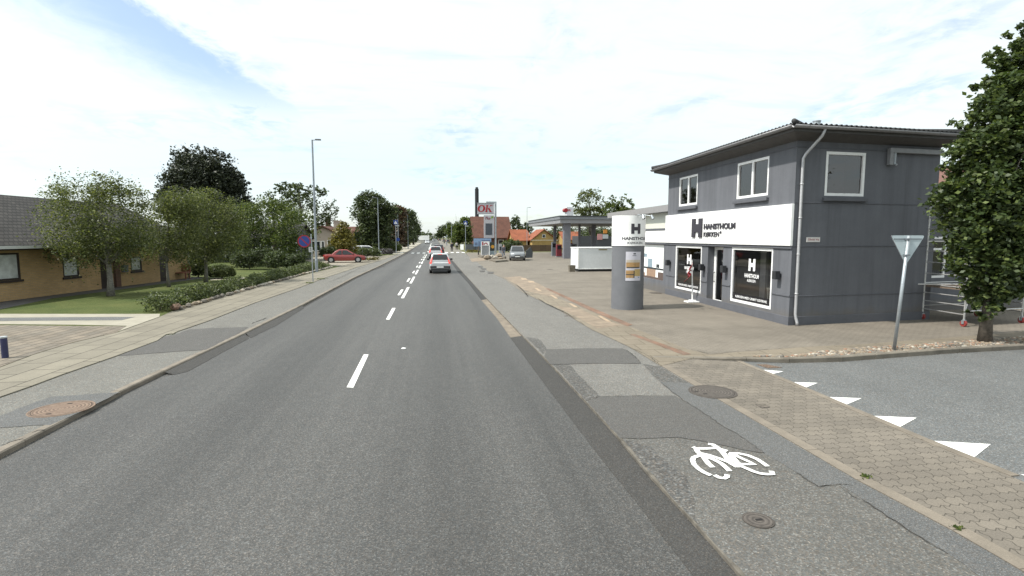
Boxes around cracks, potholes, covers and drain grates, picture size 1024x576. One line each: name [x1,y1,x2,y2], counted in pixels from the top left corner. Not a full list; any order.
manhole cover [688,385,737,399]
manhole cover [742,512,775,529]
manhole cover [26,400,96,418]
crack [796,472,944,551]
